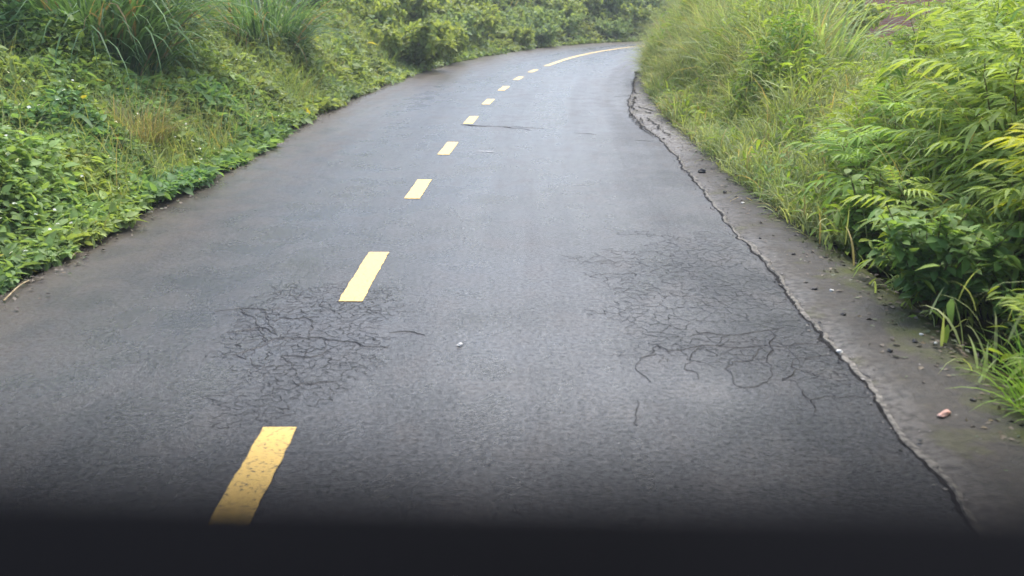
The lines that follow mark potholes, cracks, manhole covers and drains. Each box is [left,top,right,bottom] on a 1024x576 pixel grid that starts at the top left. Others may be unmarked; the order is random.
crack [203,281,424,428]
